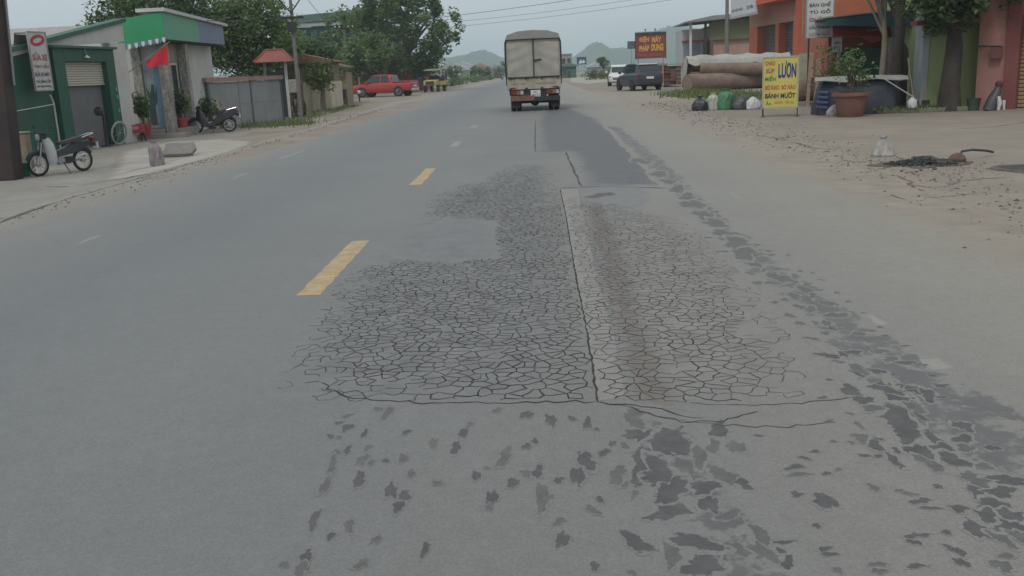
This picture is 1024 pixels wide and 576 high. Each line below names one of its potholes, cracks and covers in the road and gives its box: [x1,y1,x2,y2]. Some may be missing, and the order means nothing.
pothole [927,440,959,453]
pothole [660,532,685,573]
pothole [382,479,400,500]
pothole [397,488,414,501]
pothole [596,447,613,458]
pothole [618,426,655,443]
pothole [629,424,697,460]
pothole [909,451,951,474]
pothole [690,441,709,474]
